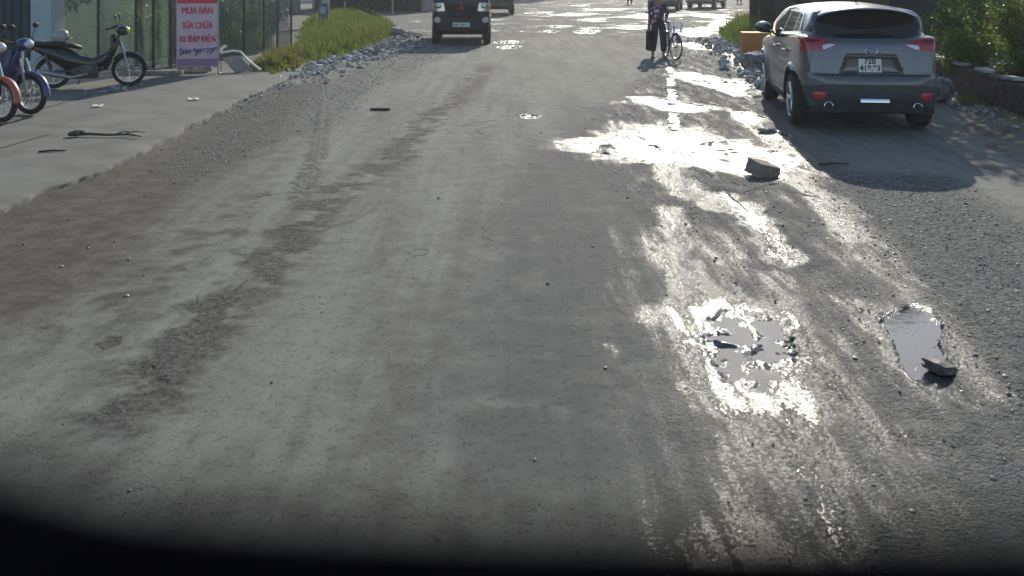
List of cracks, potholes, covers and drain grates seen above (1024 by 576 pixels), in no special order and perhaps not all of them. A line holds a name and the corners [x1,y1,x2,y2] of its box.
pothole [508,115,900,199]
pothole [858,286,979,424]
pothole [674,286,825,431]
